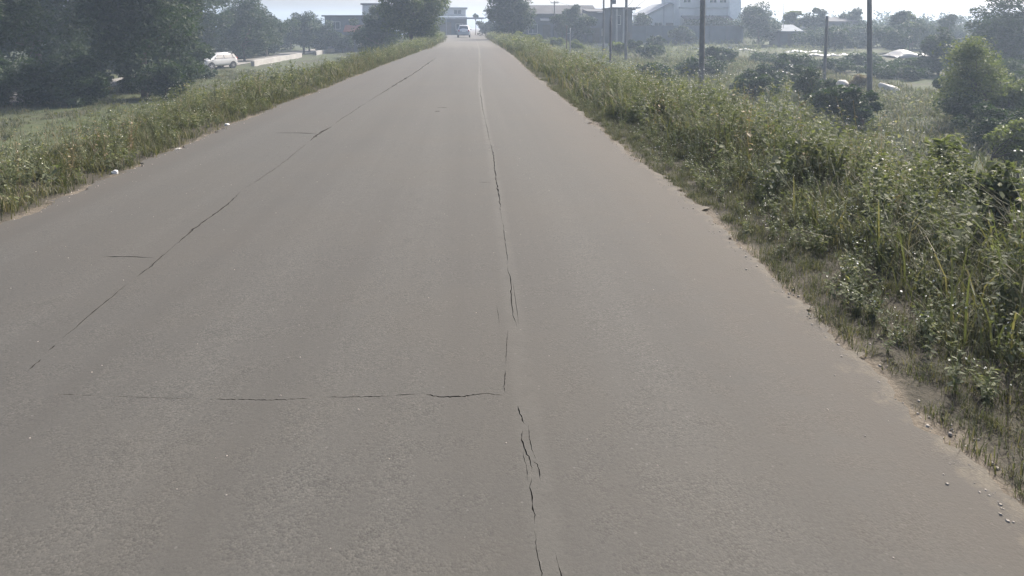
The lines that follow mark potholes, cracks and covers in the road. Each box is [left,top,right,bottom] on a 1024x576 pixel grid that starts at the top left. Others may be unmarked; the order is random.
crack [28,59,434,370]
crack [480,88,518,363]
crack [65,373,506,400]
crack [518,408,562,576]
